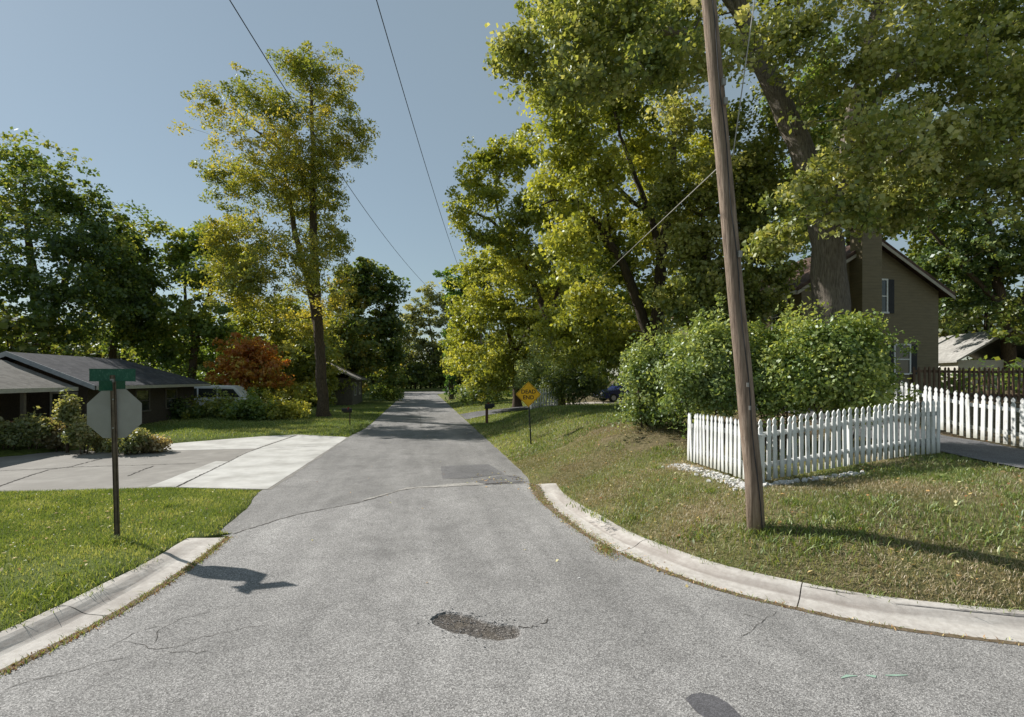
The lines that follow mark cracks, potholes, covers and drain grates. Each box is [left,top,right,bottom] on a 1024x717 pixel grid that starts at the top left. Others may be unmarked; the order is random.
crack [4,611,268,690]
pothole [417,604,521,647]
